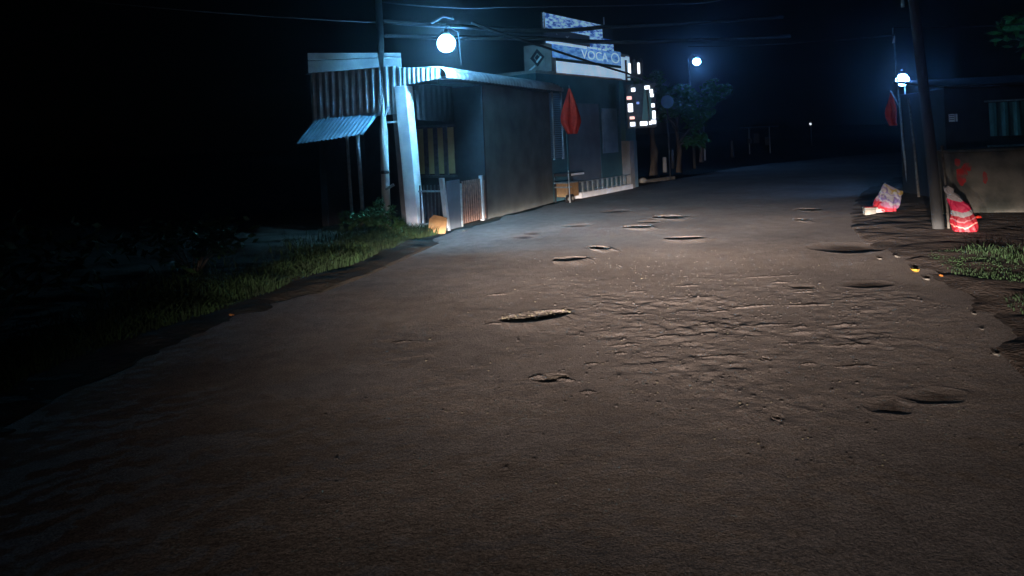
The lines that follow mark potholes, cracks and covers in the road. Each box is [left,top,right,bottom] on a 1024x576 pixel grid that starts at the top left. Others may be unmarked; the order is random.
pothole [662,236,710,244]
pothole [650,214,694,222]
pothole [549,256,595,266]
pothole [837,279,900,289]
crack [528,275,877,394]
pothole [890,385,973,407]
pothole [586,245,622,254]
pothole [855,395,921,418]
pothole [492,309,582,332]
pothole [529,373,572,385]
pothole [799,242,889,255]
